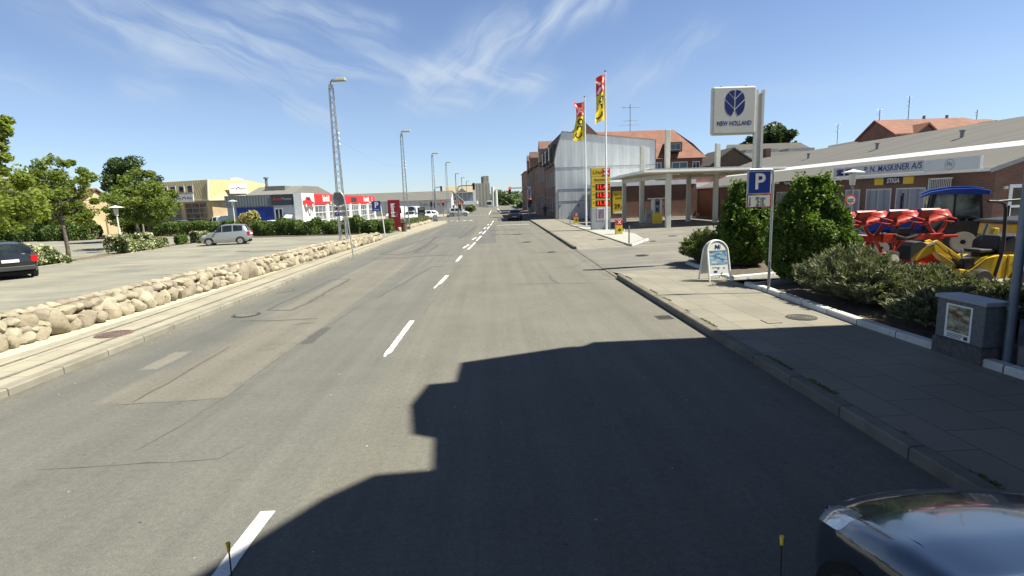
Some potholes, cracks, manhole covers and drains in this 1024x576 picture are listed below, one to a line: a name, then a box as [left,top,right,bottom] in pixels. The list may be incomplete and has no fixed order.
manhole cover [94,330,134,338]
